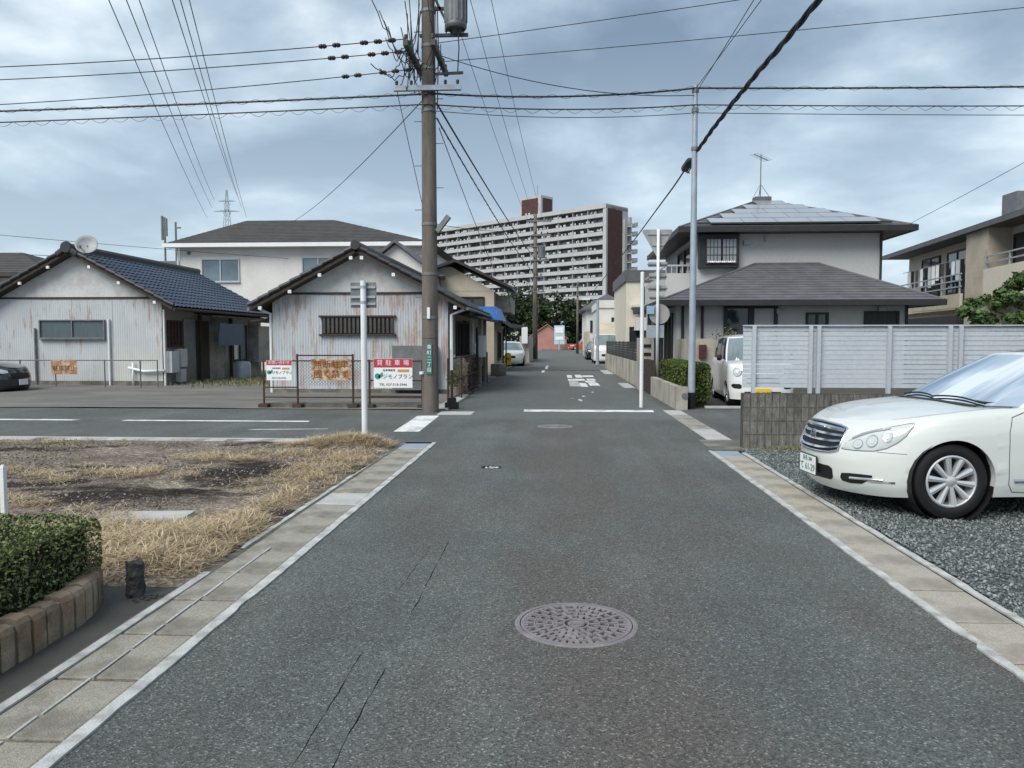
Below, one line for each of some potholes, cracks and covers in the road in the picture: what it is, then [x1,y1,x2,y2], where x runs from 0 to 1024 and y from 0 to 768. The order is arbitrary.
crack [400,541,449,617]
manhole cover [515,603,638,648]
